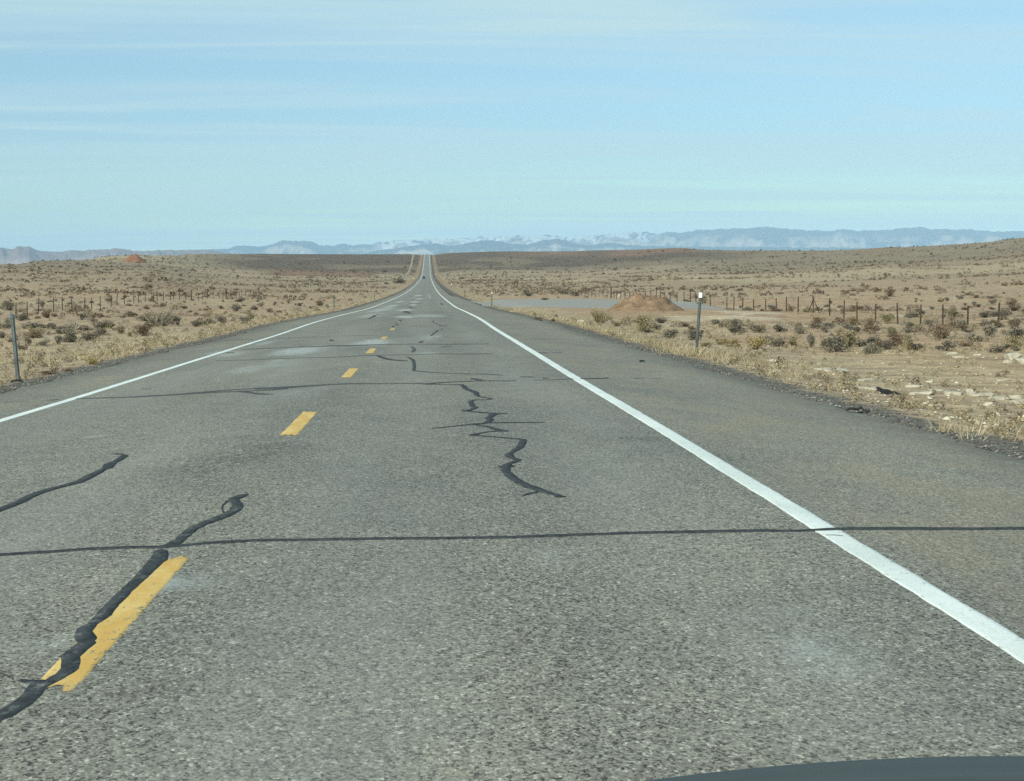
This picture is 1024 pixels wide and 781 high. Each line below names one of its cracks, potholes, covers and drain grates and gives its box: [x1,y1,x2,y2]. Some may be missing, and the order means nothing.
crack [377,303,548,379]
